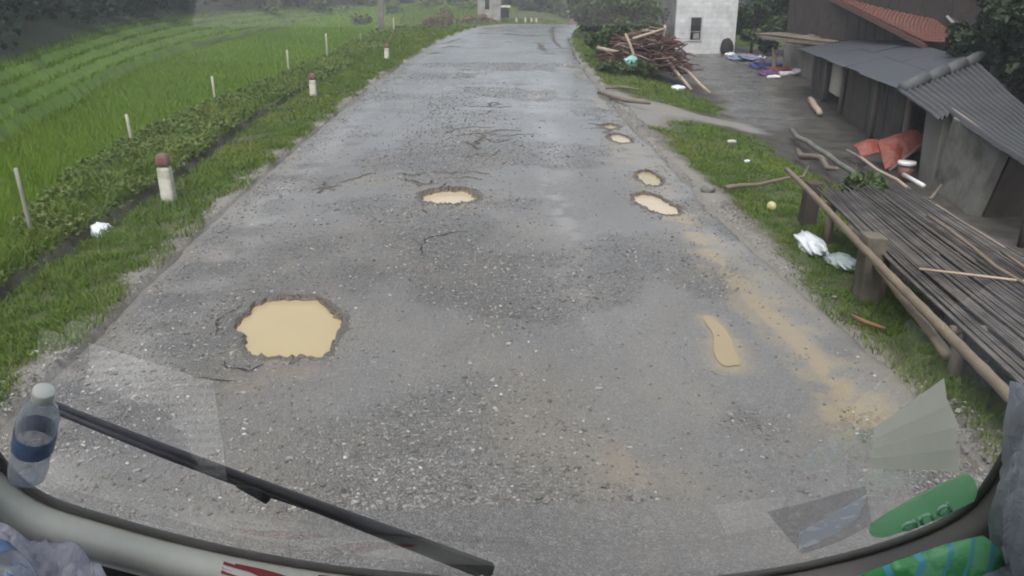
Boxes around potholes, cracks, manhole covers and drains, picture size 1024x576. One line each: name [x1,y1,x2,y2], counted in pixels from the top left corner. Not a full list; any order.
pothole [226,293,352,365]
crack [396,28,555,186]
crack [419,231,468,255]
pothole [415,186,484,206]
crack [312,172,375,193]
pothole [632,167,666,188]
pothole [629,190,684,217]
pothole [604,132,635,144]
